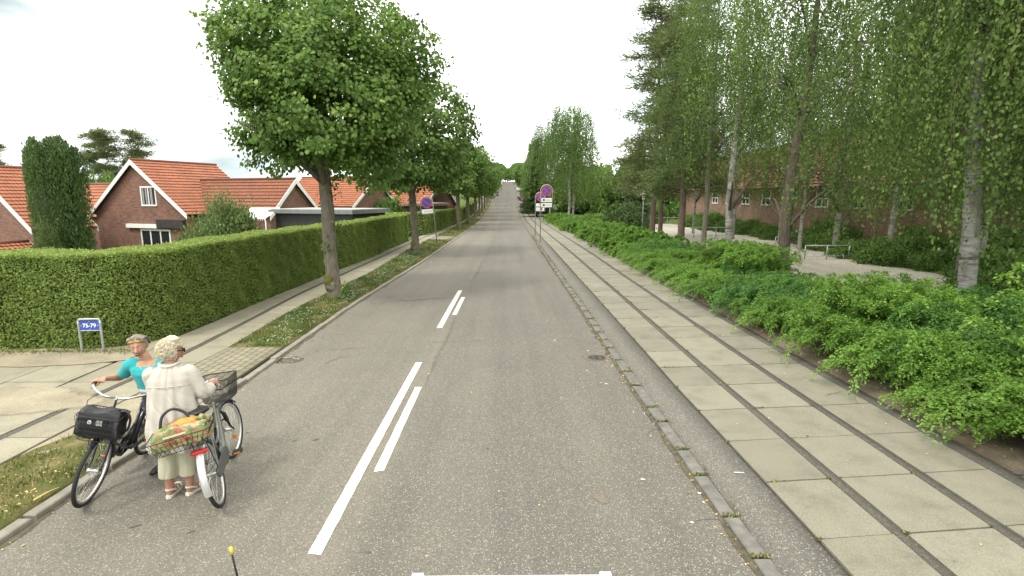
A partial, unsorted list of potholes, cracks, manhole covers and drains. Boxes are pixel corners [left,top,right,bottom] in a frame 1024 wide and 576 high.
crack [425,317,484,385]
